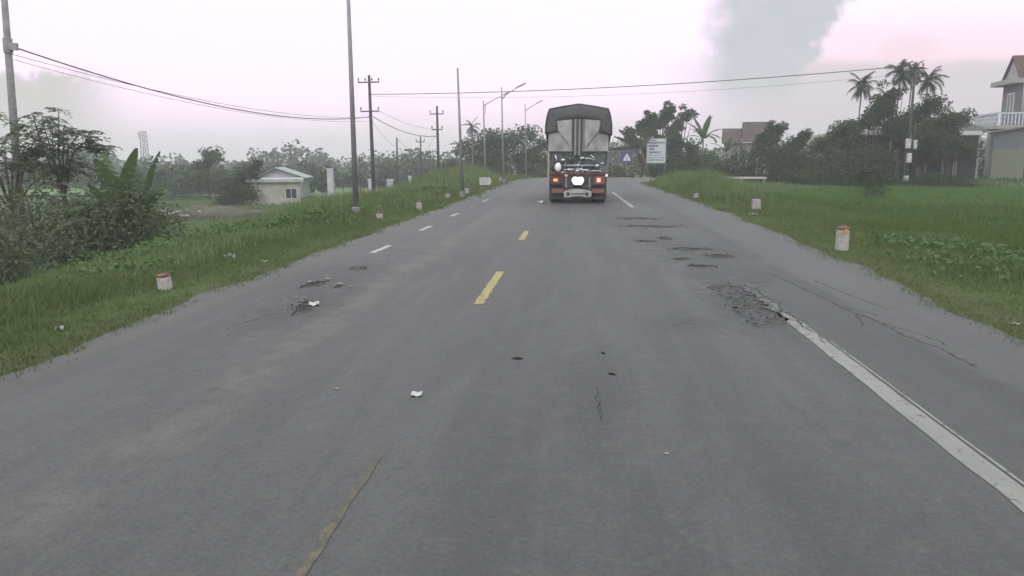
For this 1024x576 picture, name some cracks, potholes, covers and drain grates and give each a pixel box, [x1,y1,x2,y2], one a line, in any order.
pothole [703,282,789,327]
crack [743,274,979,369]
pothole [297,280,329,289]
crack [595,387,603,423]
pothole [275,299,319,315]
